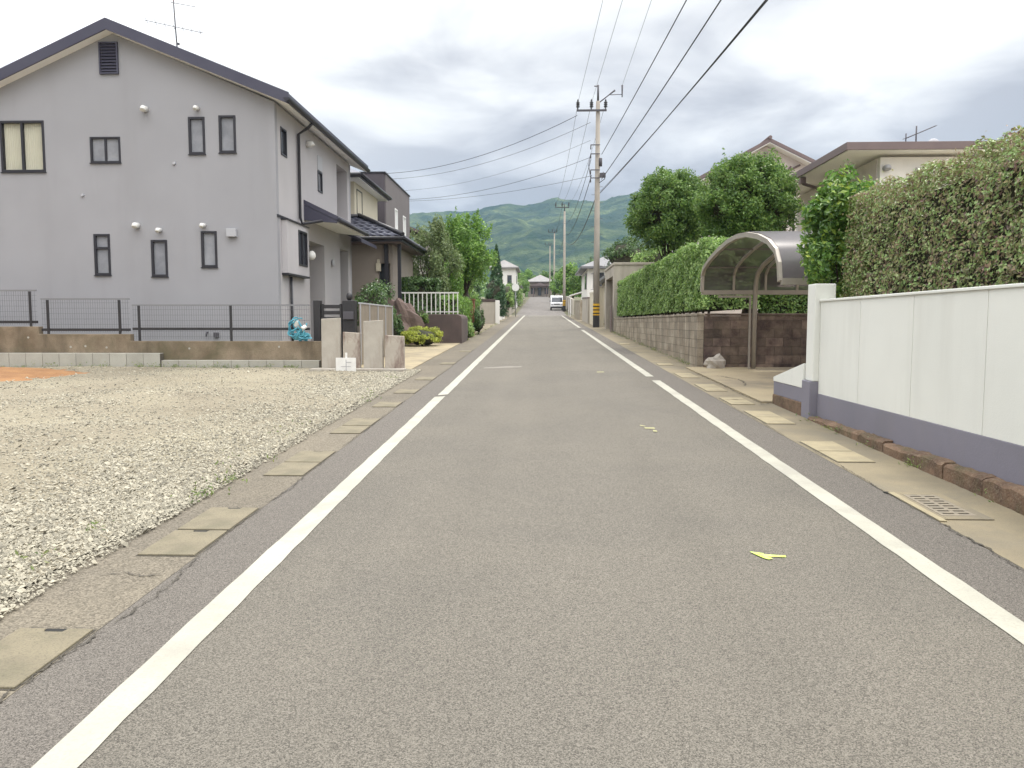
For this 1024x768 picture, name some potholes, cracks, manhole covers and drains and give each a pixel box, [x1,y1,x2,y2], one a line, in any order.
drain grate [888,492,994,522]
